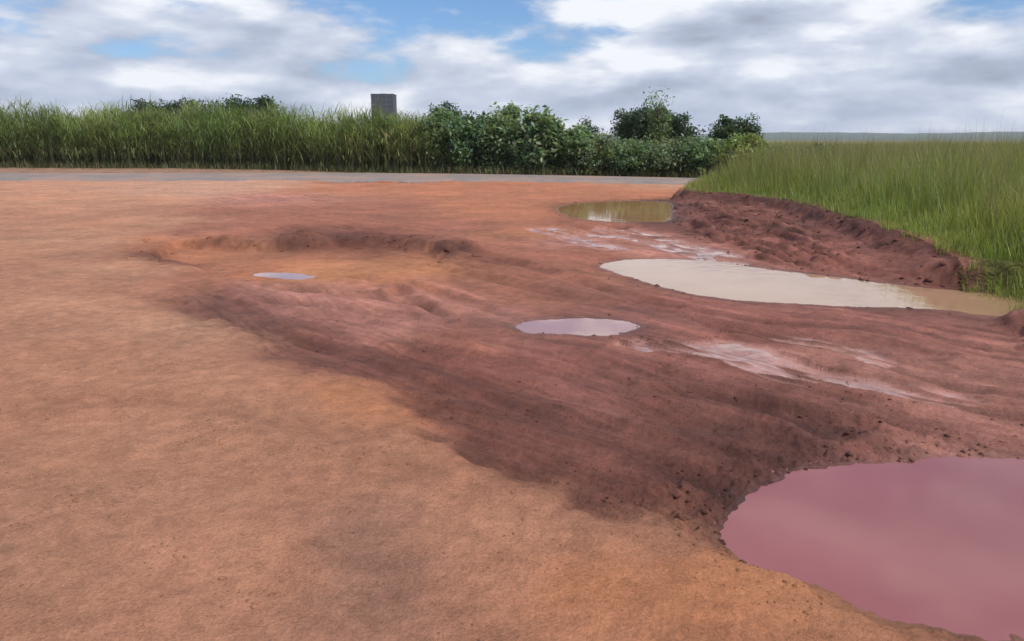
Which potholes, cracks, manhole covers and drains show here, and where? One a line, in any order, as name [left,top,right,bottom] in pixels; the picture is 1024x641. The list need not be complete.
pothole [611,418,1024,641]
pothole [127,230,482,288]
pothole [566,251,1024,324]
pothole [492,312,667,343]
pothole [530,189,703,228]
